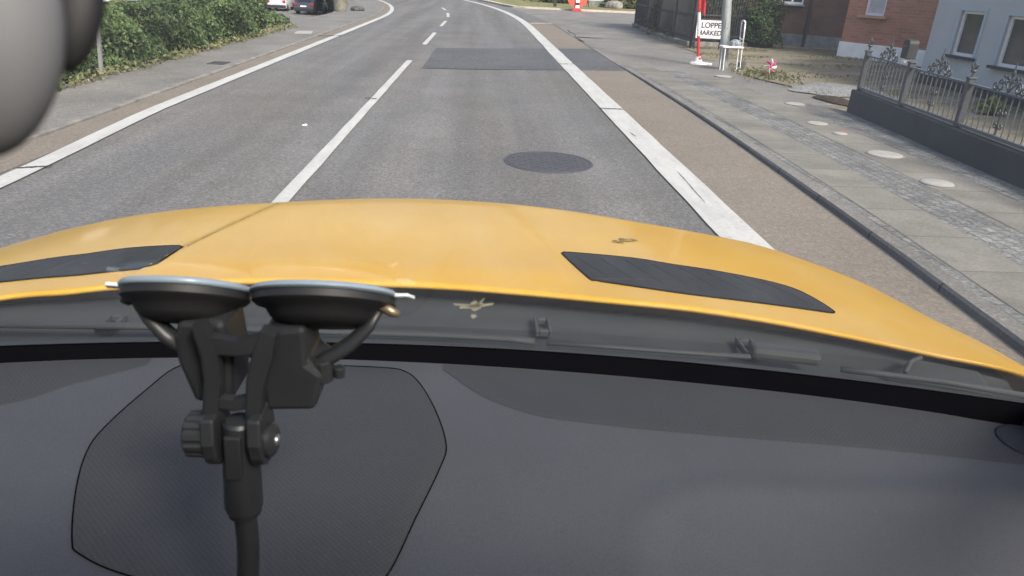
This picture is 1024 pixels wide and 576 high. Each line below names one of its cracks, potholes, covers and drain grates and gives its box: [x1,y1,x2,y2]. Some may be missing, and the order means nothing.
manhole cover [504,151,593,173]
manhole cover [865,150,905,159]
manhole cover [919,178,957,188]
